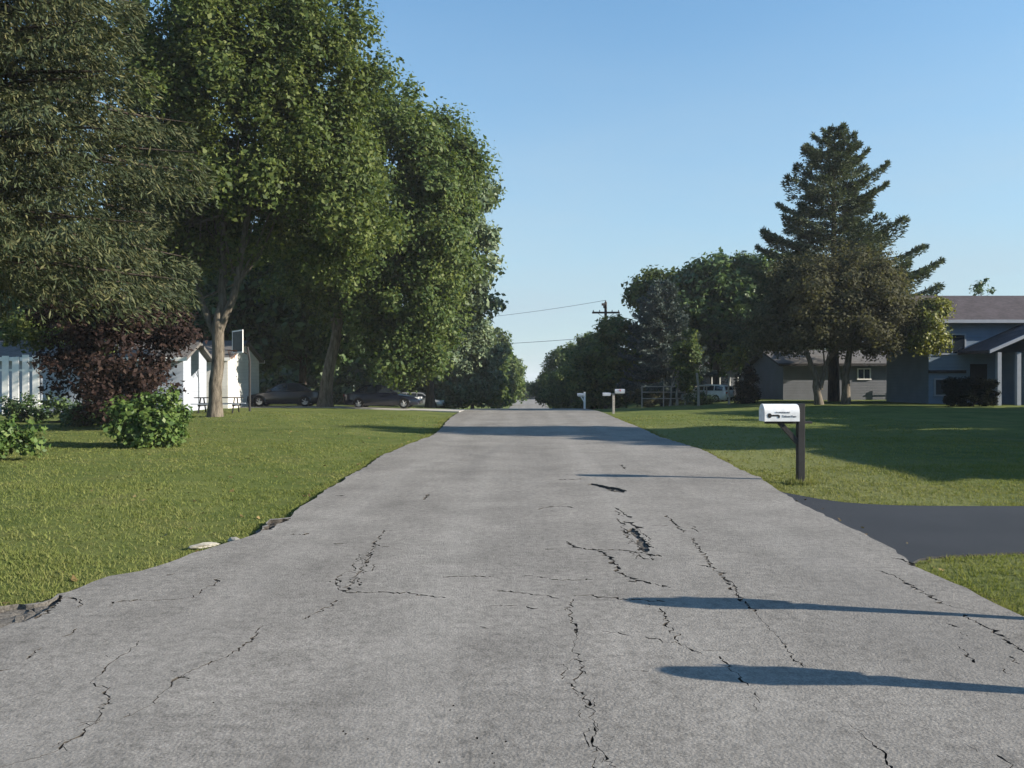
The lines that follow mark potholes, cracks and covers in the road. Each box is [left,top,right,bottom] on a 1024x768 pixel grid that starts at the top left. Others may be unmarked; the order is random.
crack [2,627,260,767]
crack [878,570,1024,676]
pothole [628,528,652,553]
crack [305,530,446,619]
pothole [262,518,291,530]
crack [850,725,893,768]
crack [451,508,804,768]
crack [34,596,83,619]
pothole [588,483,626,493]
